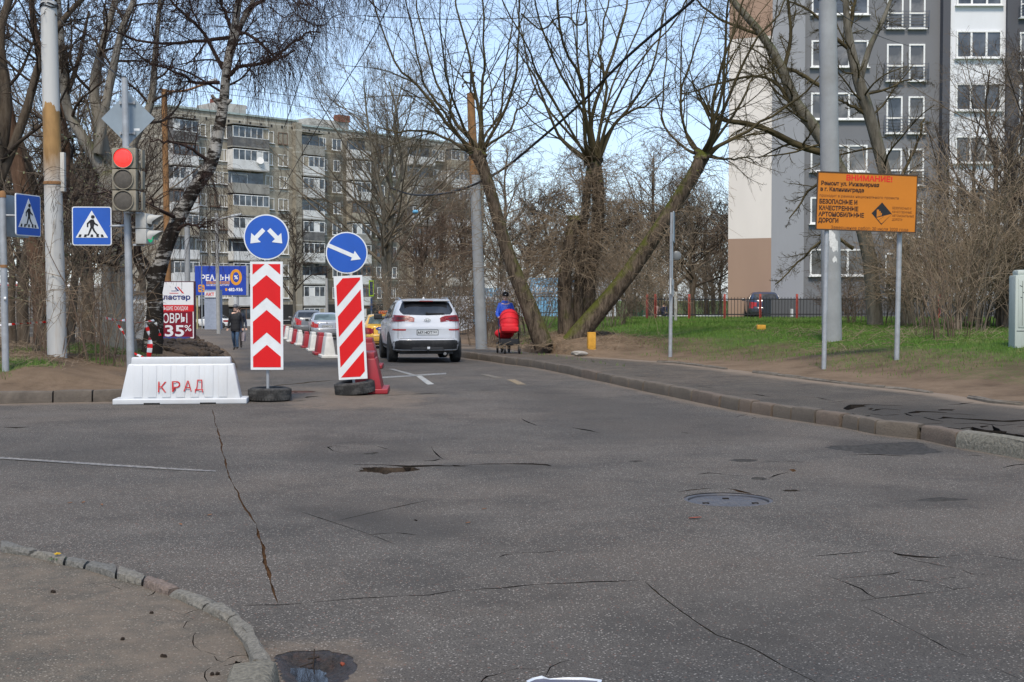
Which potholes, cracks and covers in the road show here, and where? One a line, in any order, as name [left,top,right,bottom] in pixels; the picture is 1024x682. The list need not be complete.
manhole cover [684,493,773,506]
crack [282,580,644,605]
crack [810,550,1014,603]
pothole [273,650,357,682]
crack [300,501,829,543]
crack [149,591,248,682]
crack [327,444,551,472]
